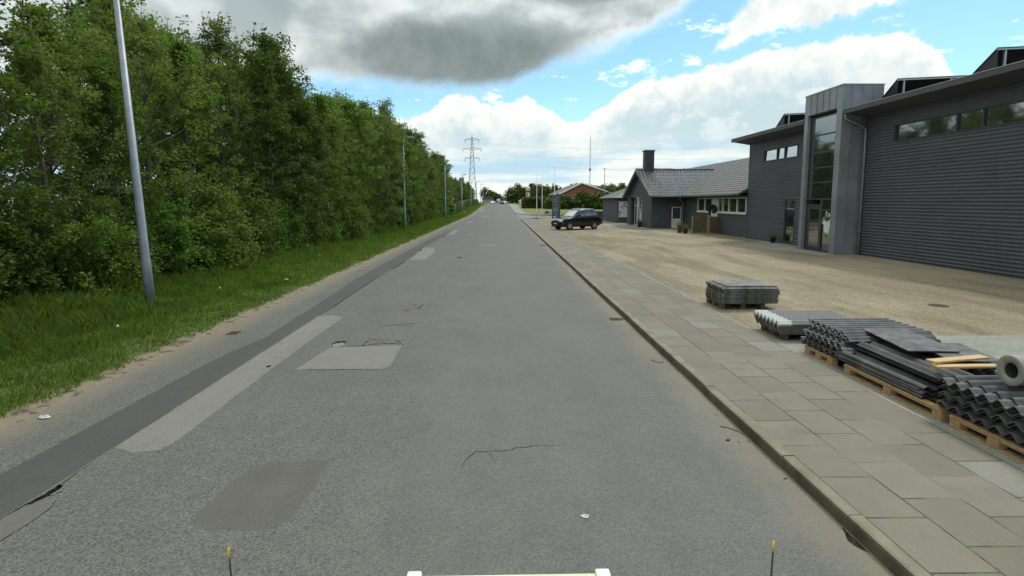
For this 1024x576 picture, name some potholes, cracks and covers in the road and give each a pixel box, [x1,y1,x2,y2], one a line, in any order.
crack [361,304,428,346]
crack [462,444,564,466]
crack [0,464,90,542]
